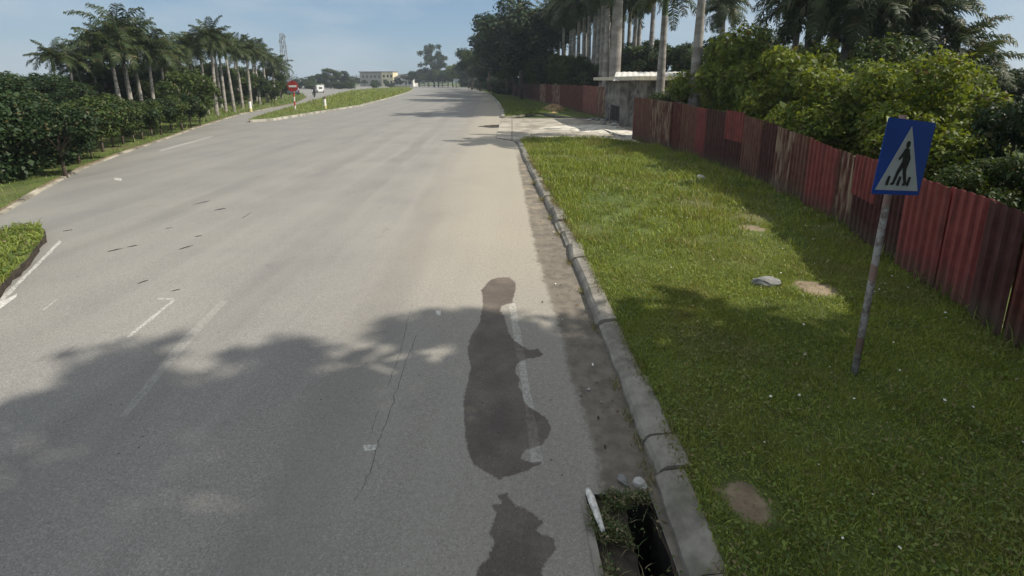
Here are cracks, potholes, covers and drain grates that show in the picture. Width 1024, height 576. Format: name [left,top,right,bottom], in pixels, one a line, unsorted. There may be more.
crack [354,309,417,499]
drain grate [581,492,679,576]
